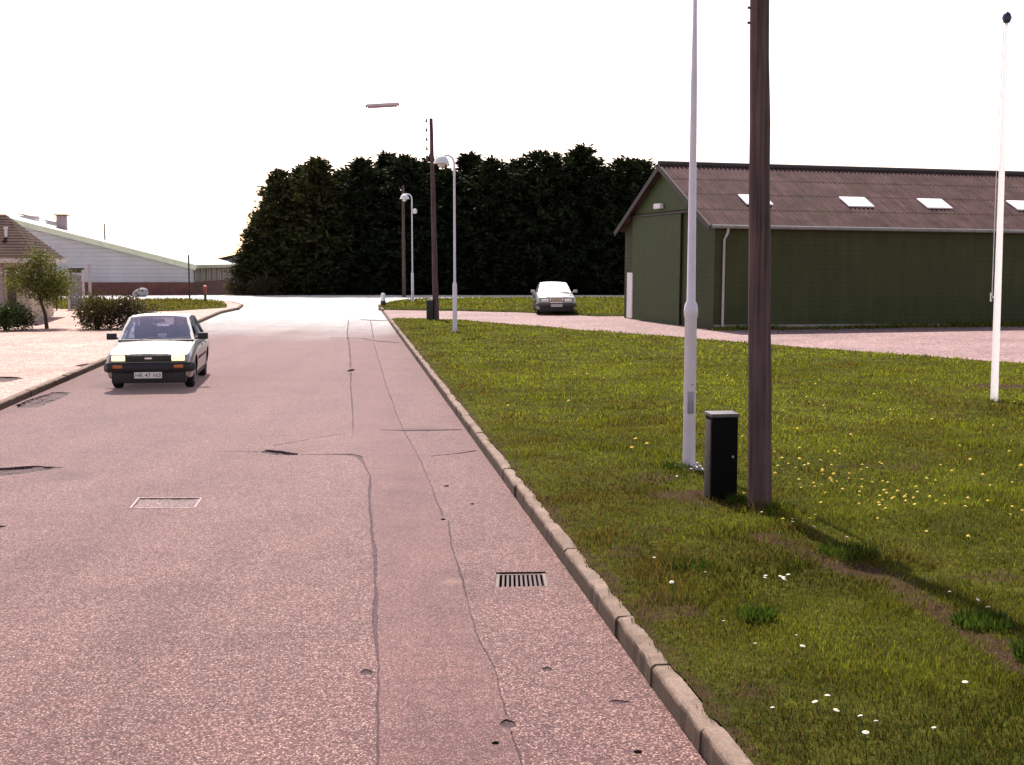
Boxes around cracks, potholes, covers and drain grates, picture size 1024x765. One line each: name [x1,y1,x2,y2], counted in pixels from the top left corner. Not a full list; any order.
manhole cover [129,497,203,509]
pothole [0,466,62,476]
drain grate [495,572,549,587]
pothole [500,719,516,728]
pothole [15,392,71,408]
